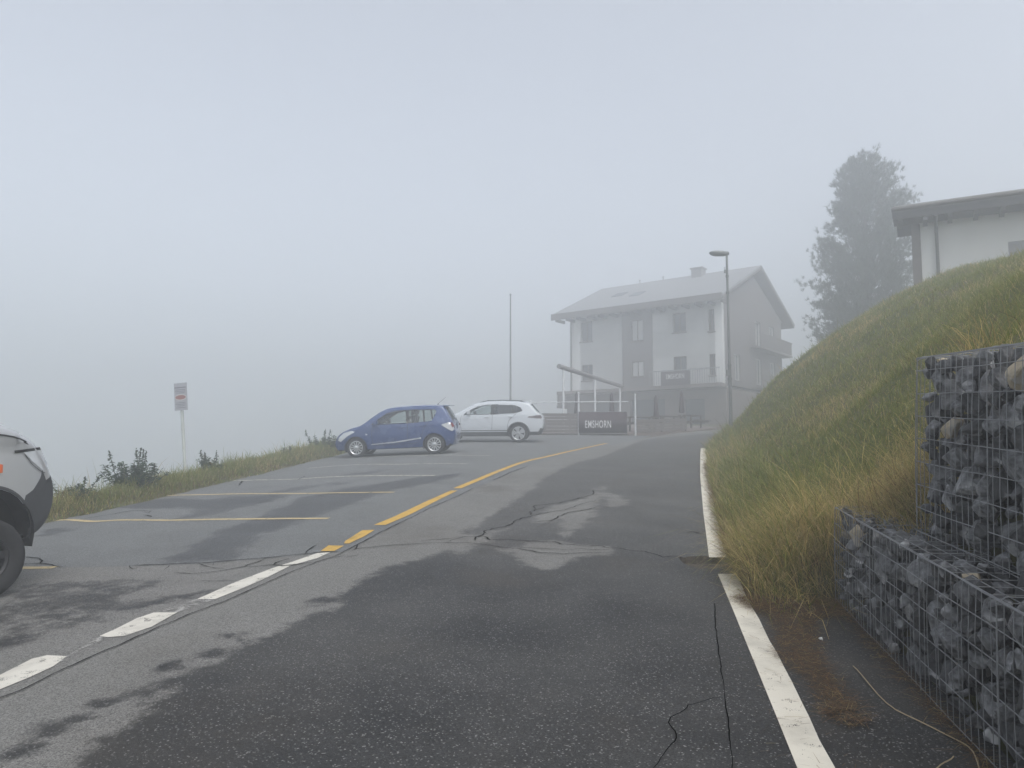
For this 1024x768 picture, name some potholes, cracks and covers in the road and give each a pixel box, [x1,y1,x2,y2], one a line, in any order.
crack [653,697,722,768]
crack [352,491,670,557]
